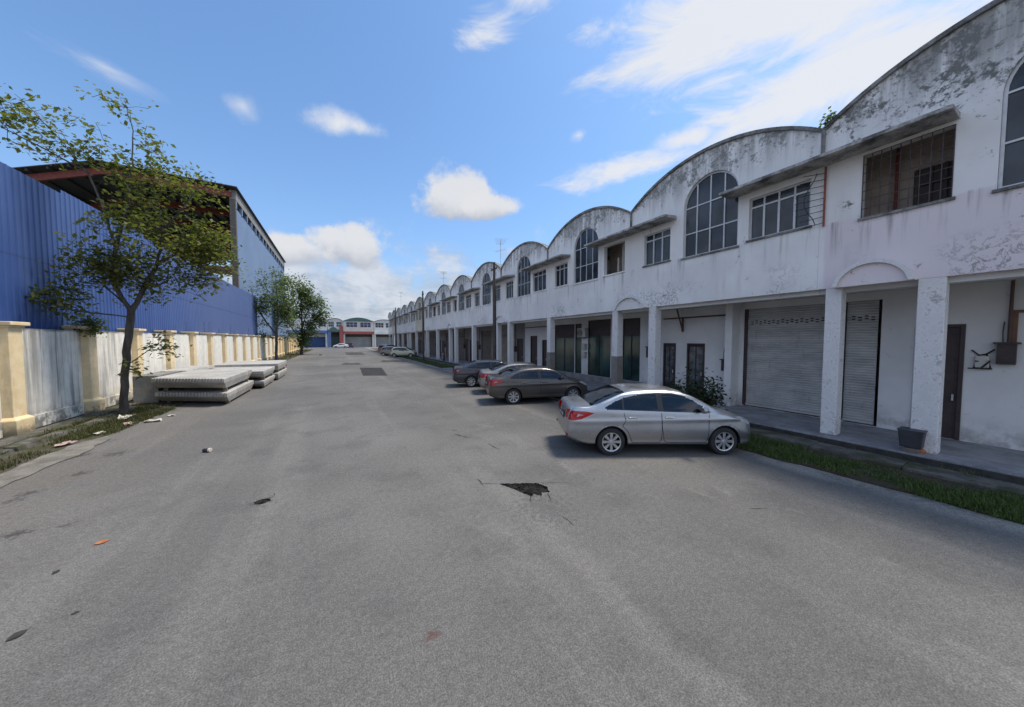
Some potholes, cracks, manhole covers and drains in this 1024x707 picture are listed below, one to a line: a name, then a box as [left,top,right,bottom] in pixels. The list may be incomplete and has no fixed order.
pothole [502,483,550,496]
